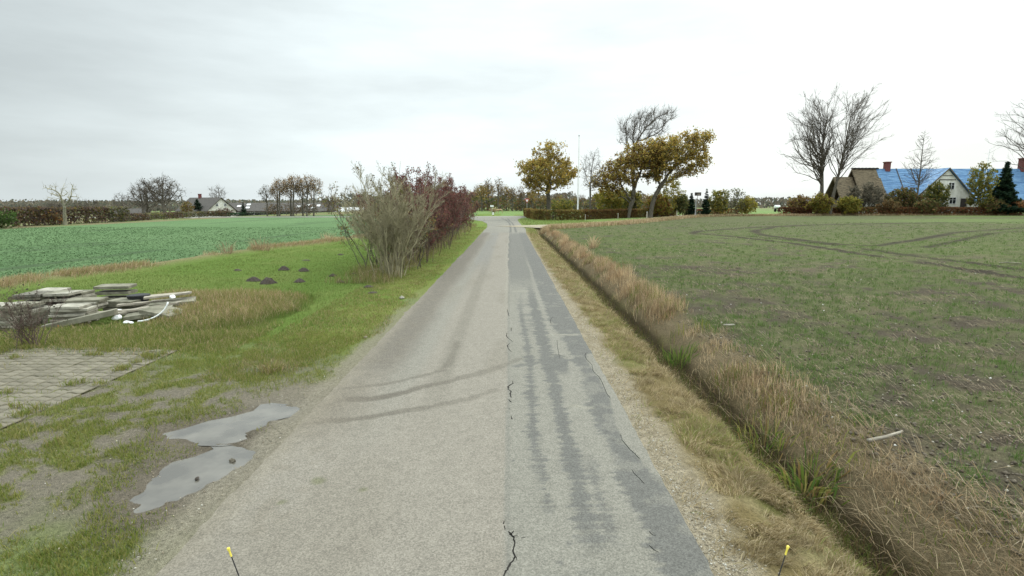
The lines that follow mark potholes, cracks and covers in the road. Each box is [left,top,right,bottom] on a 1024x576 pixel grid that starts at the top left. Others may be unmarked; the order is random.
crack [503,522,525,576]
